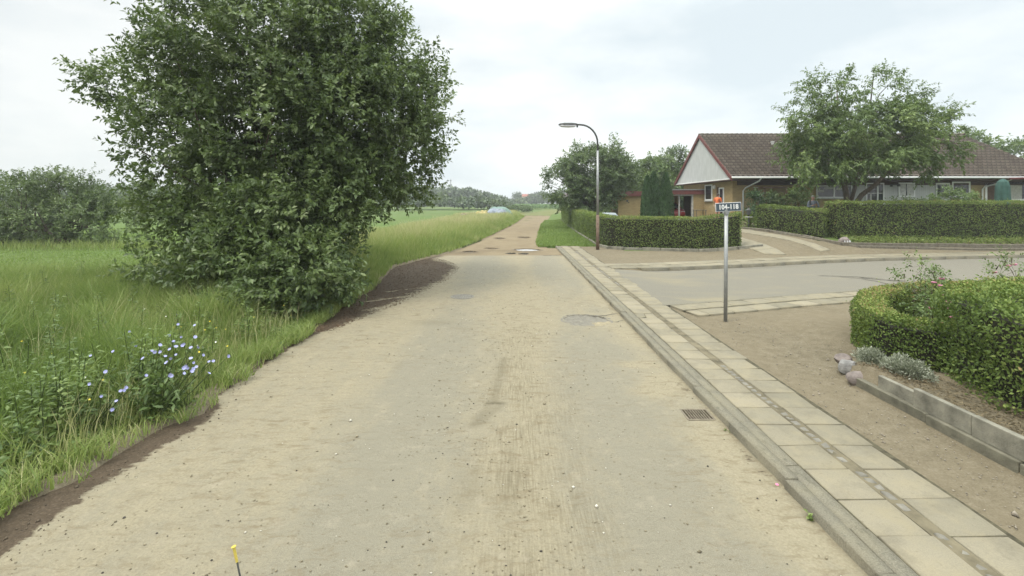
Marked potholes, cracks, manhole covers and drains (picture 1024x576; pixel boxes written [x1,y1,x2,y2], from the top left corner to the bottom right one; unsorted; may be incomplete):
drain grate [680,409,716,421]
